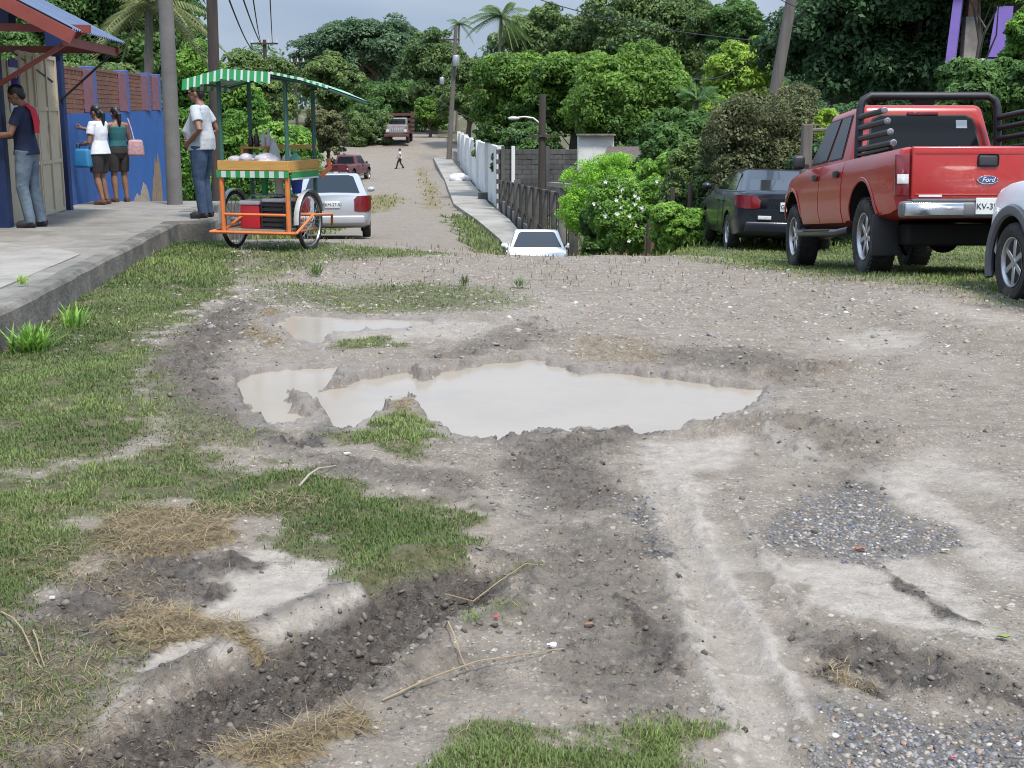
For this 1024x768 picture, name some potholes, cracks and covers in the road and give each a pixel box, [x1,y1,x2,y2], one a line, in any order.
pothole [216,359,432,433]
pothole [390,351,787,444]
pothole [258,311,445,346]
